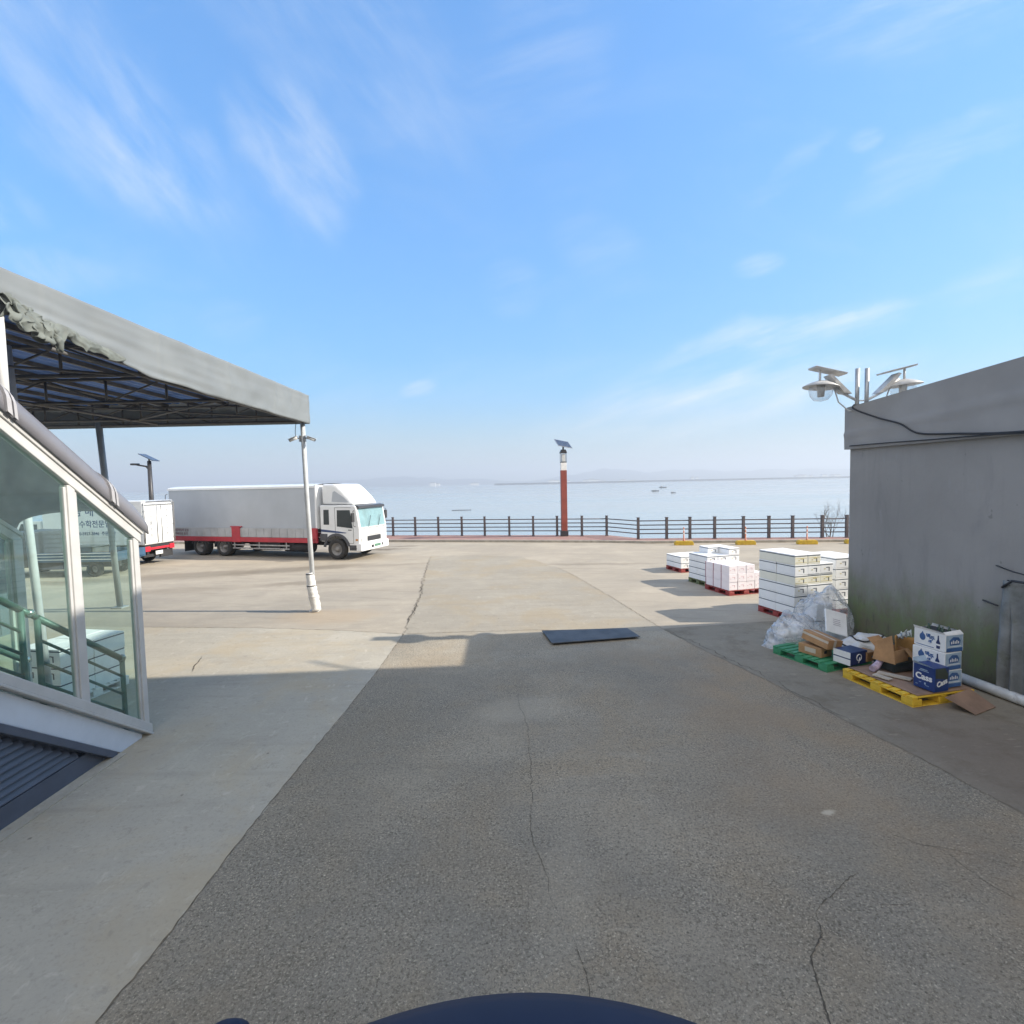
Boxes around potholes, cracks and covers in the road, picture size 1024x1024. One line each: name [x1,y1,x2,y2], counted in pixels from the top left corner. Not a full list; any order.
crack [404,564,429,633]
crack [810,873,913,1024]
crack [518,695,590,997]
